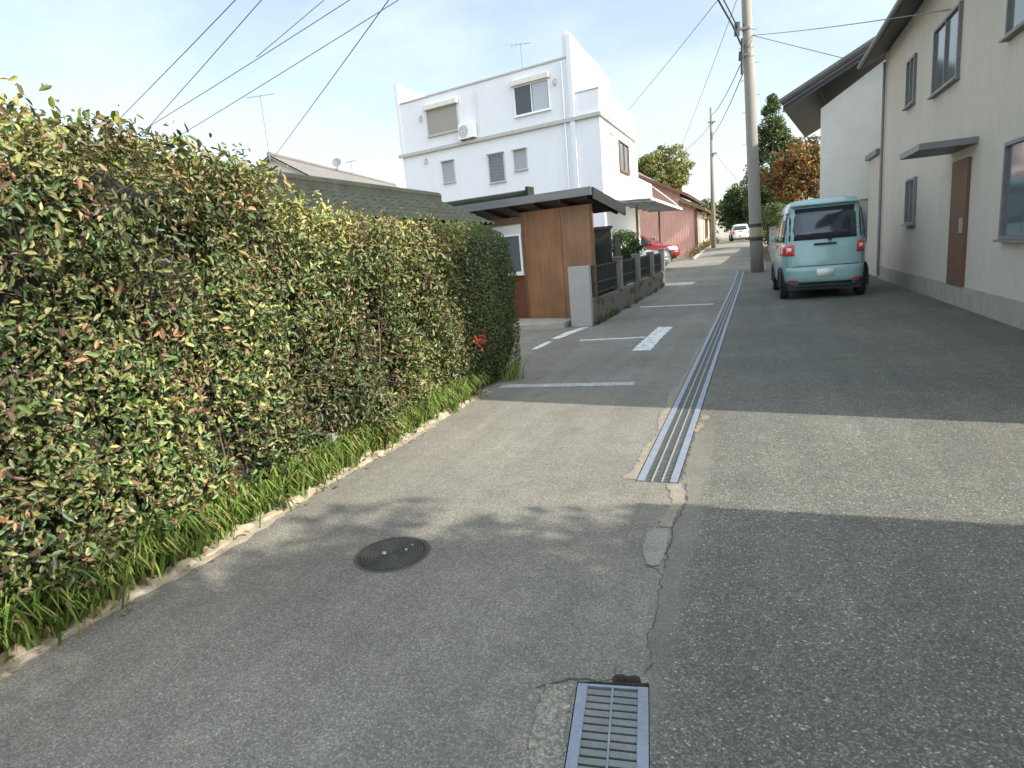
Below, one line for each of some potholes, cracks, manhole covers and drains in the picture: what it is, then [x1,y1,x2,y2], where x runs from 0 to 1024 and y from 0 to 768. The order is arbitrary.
drain grate [659,405,702,438]
drain grate [700,340,723,353]
drain grate [637,436,692,483]
drain grate [685,365,715,384]
drain grate [674,382,709,406]
manhole cover [353,536,431,573]
drain grate [693,351,719,366]
drain grate [706,331,726,341]
drain grate [565,683,649,768]
drain grate [710,323,728,331]
